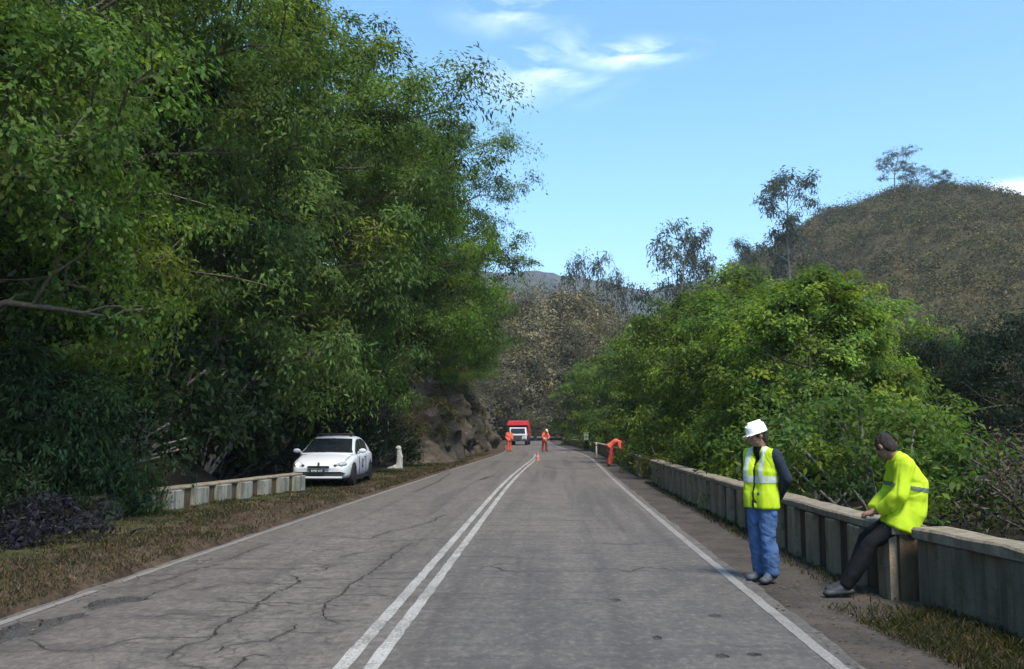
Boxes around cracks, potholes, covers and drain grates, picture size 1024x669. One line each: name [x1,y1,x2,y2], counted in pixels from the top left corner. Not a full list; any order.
pothole [84,596,148,611]
pothole [0,613,89,644]
crack [24,515,444,669]
